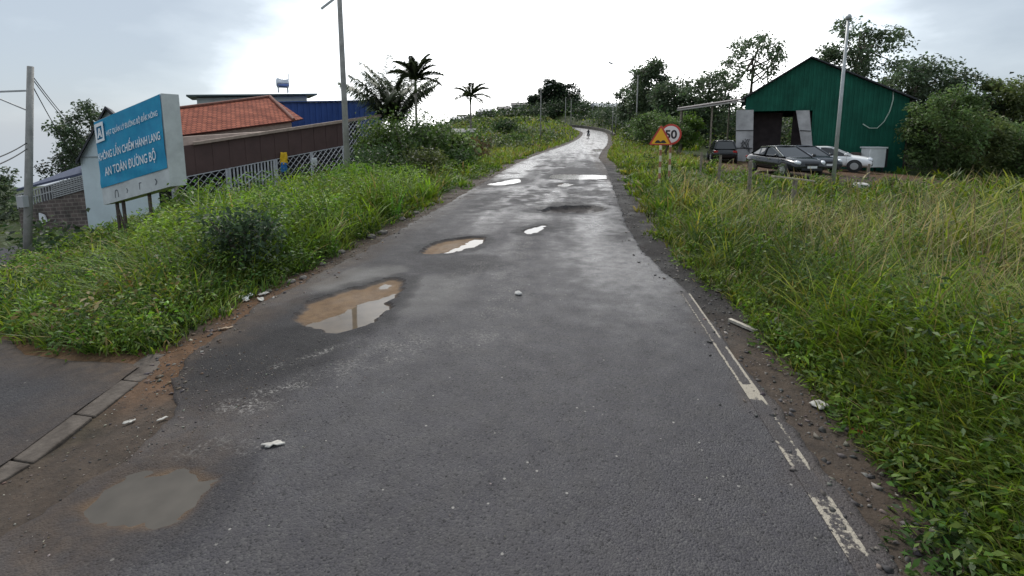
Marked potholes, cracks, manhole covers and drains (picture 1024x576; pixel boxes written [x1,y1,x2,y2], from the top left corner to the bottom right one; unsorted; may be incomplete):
pothole [521,224,548,234]
pothole [486,178,524,186]
pothole [51,457,237,546]
pothole [536,205,607,214]
pothole [288,276,407,334]
pothole [419,236,488,254]
